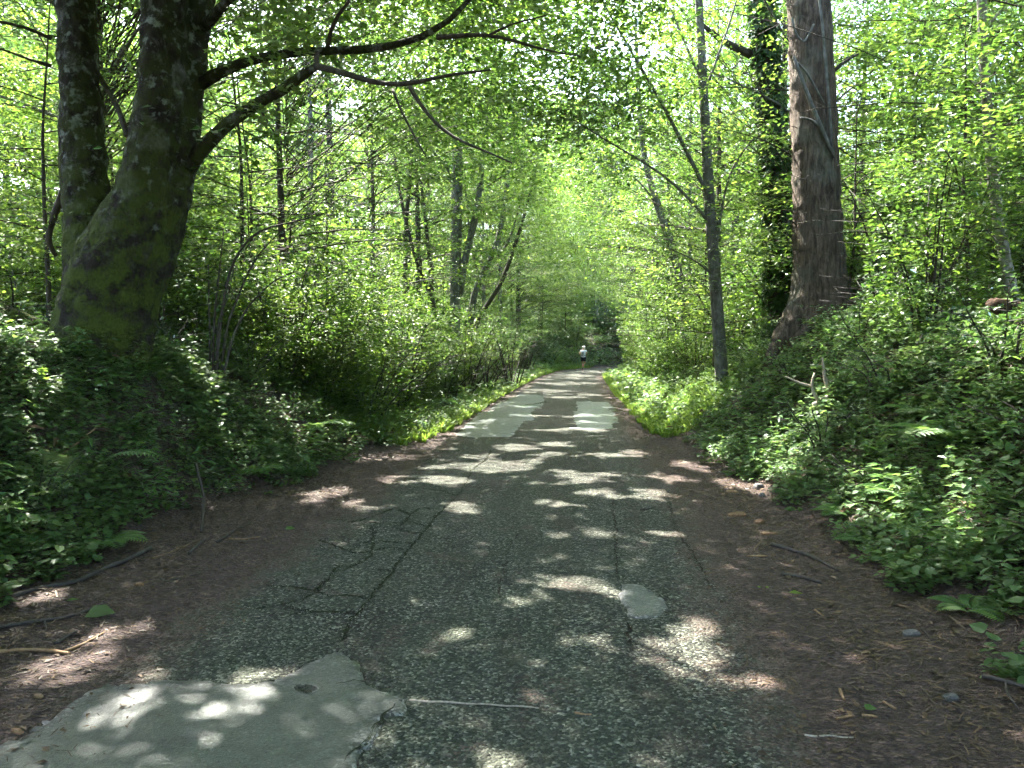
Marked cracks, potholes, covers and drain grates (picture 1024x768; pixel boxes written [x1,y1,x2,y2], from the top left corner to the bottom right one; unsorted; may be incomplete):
crack [256,451,519,641]
crack [611,498,633,651]
crack [667,496,712,589]
